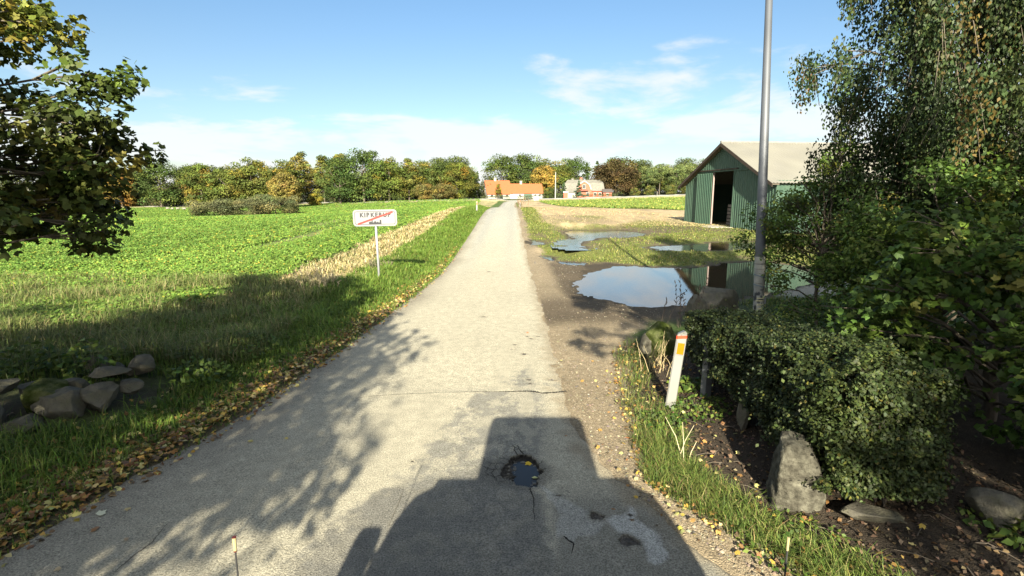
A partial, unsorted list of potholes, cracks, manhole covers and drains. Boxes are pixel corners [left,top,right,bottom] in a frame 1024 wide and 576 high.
pothole [496,452,548,490]
crack [482,445,546,484]
